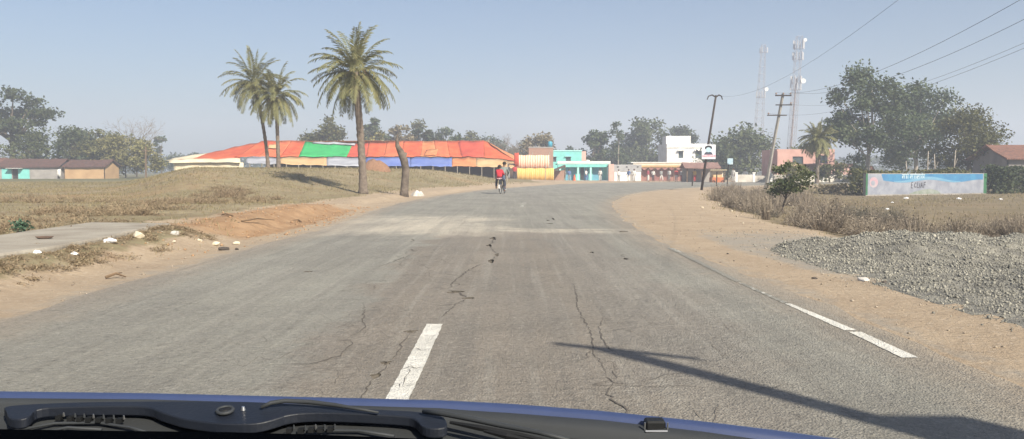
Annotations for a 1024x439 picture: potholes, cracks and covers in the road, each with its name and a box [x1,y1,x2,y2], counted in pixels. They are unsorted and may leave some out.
crack [206,239,481,398]
crack [538,284,785,422]
